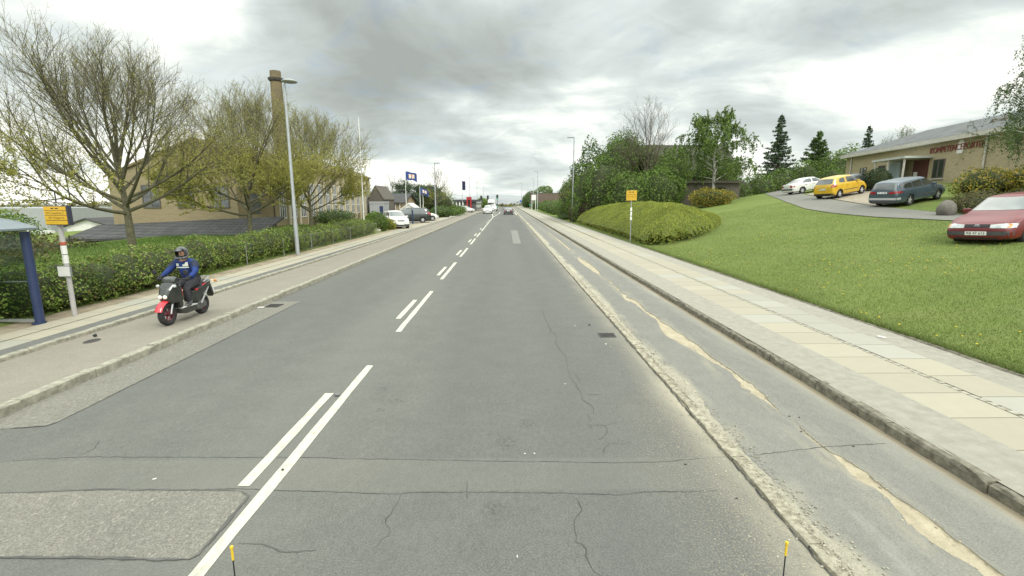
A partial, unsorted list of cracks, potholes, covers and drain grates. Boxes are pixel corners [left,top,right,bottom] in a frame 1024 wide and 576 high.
crack [241,543,315,553]
crack [574,498,600,575]
